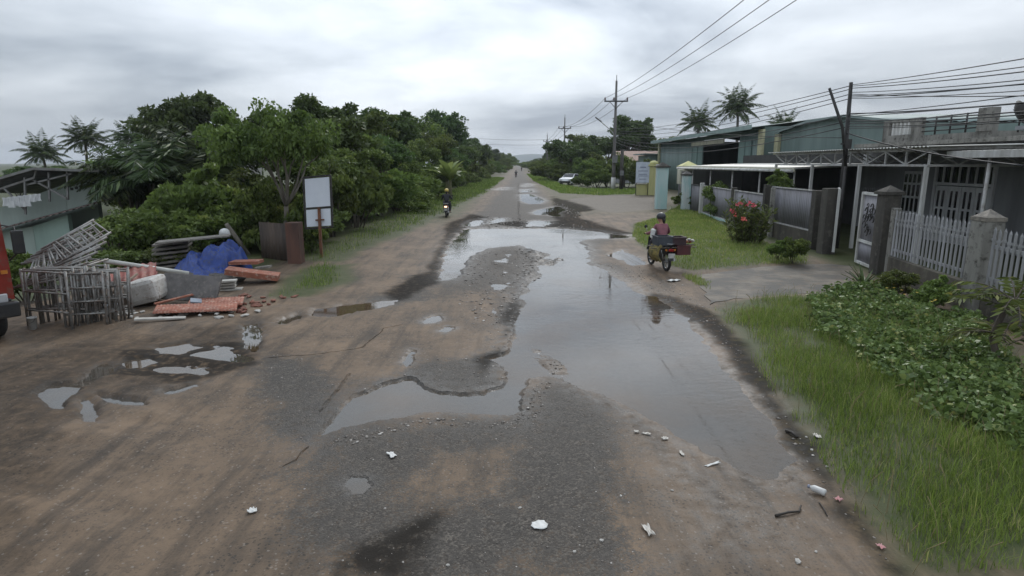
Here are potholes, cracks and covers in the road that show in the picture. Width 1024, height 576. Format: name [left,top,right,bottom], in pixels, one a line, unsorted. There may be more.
pothole [420,315,444,324]
pothole [509,259,803,488]
pothole [309,340,537,444]
crack [318,373,351,412]
crack [282,446,309,467]
pothole [436,227,633,281]
pothole [341,475,375,495]
crack [268,324,402,358]
